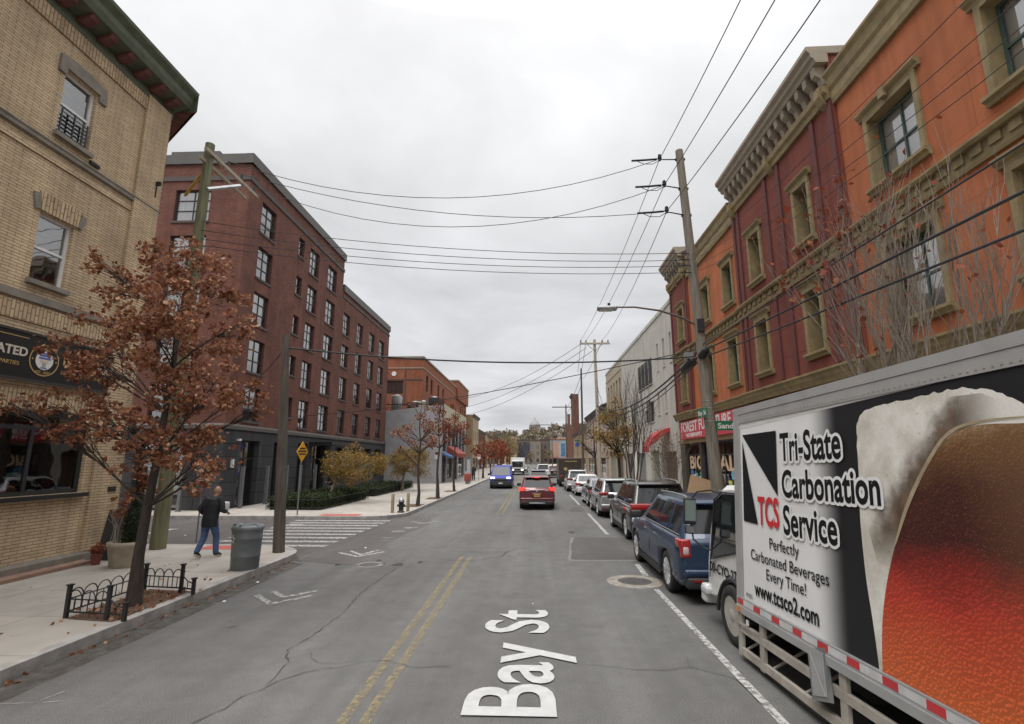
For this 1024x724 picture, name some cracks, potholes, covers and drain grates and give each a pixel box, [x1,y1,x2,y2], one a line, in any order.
crack [298,560,404,644]
crack [191,648,432,724]
manhole cover [607,575,664,589]
crack [593,659,773,714]
